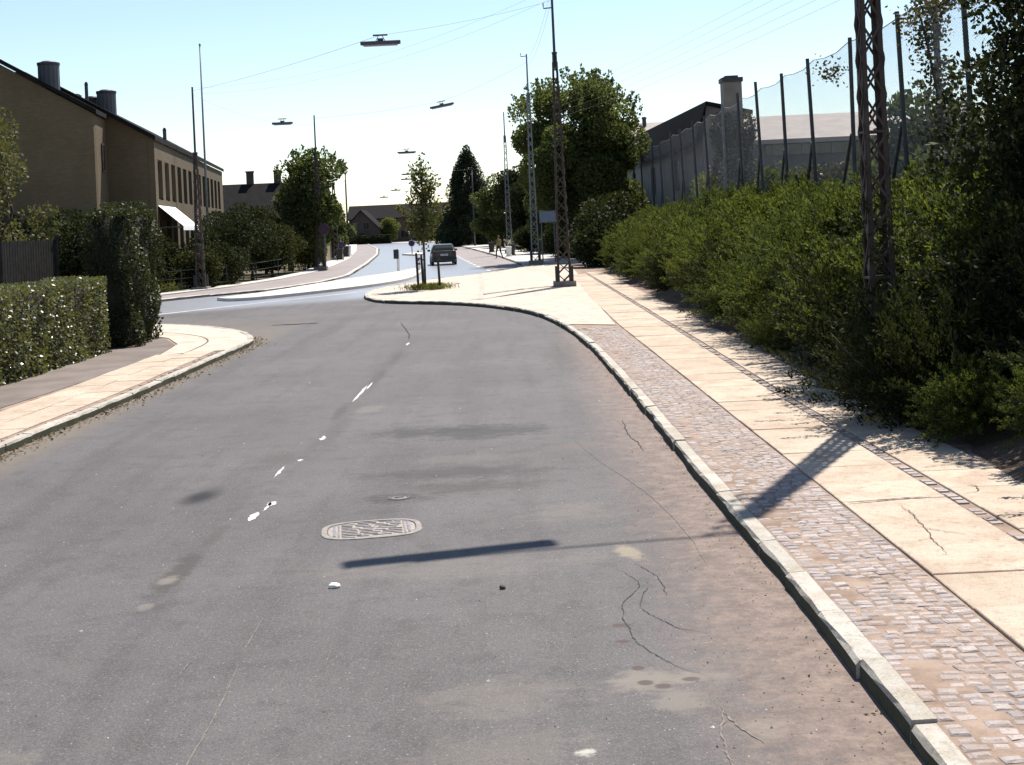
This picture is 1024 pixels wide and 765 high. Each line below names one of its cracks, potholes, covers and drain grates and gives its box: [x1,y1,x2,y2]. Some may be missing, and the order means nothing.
crack [720,705,764,765]
crack [622,562,706,675]
manhole cover [321,518,422,540]
crack [576,441,705,561]
